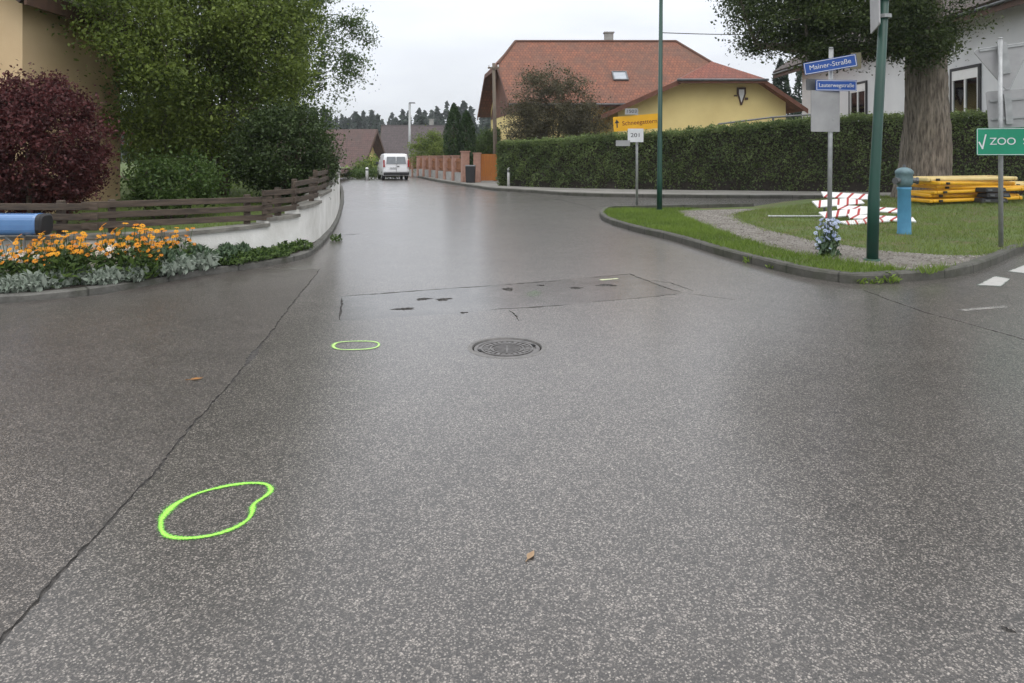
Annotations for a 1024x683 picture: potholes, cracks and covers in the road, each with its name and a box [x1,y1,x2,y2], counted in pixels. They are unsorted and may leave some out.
manhole cover [468,337,546,359]
